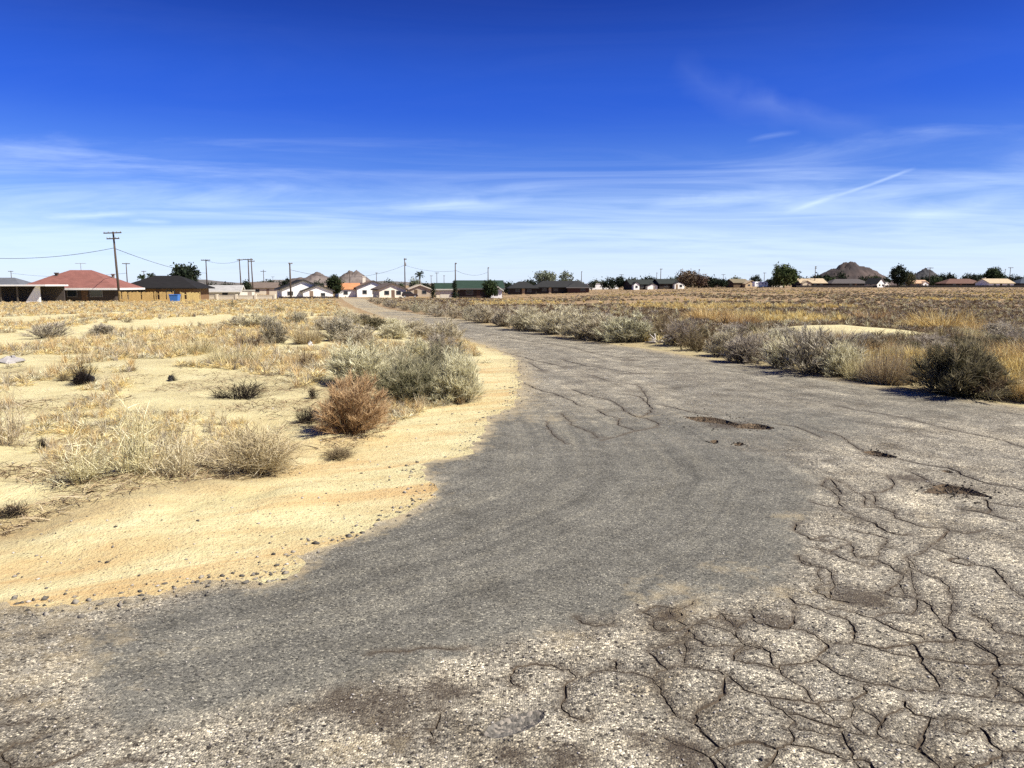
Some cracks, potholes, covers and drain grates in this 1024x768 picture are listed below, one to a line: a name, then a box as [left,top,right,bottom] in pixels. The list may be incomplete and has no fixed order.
crack [370,647,457,655]
pothole [924,484,990,497]
crack [486,339,697,441]
crack [908,461,1023,491]
pothole [684,416,775,430]
